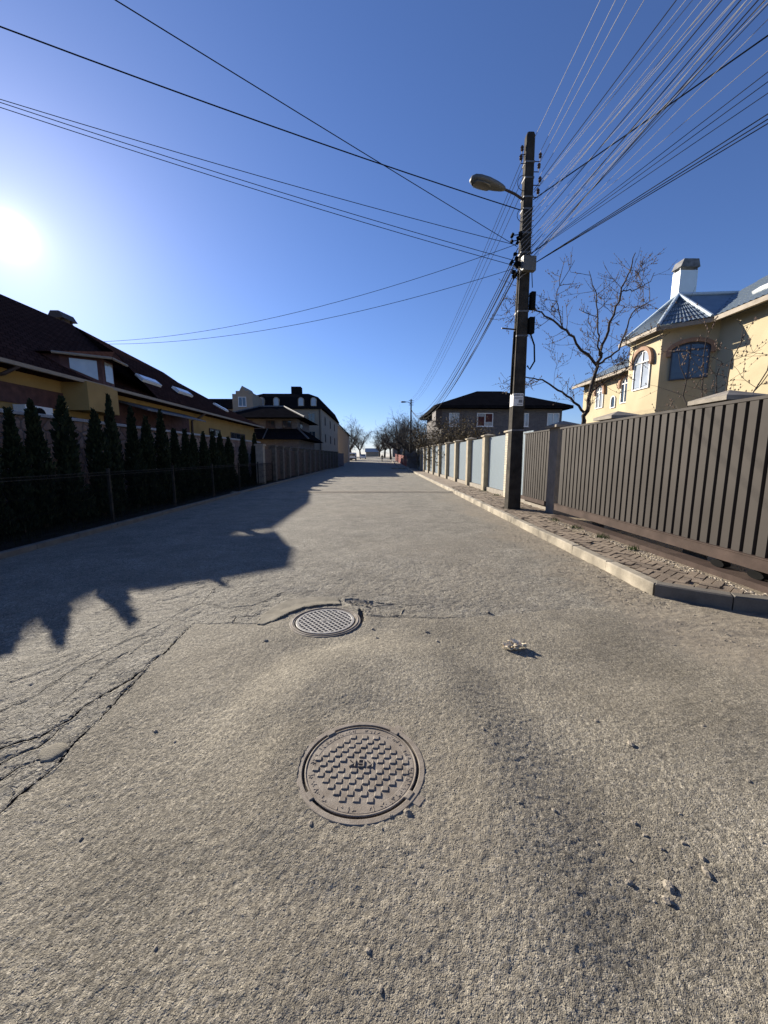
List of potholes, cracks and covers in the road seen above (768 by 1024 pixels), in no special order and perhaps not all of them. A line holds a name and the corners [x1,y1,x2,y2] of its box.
crack [0,577,283,818]
manhole cover [297,722,425,826]
manhole cover [289,607,361,638]
